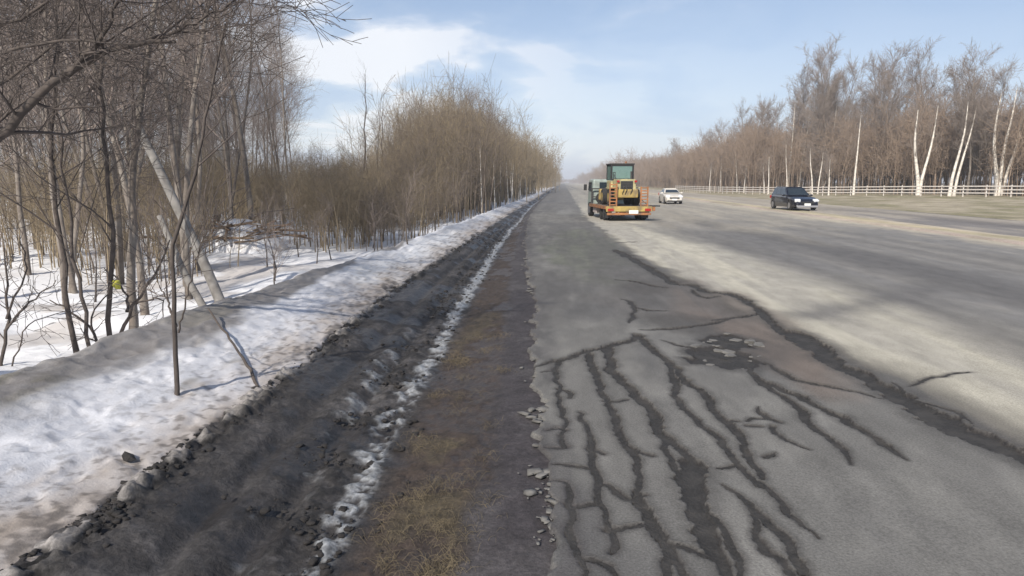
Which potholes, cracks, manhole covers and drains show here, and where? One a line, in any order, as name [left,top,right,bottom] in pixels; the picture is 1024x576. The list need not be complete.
crack [534,241,1024,576]
pothole [690,344,763,370]
